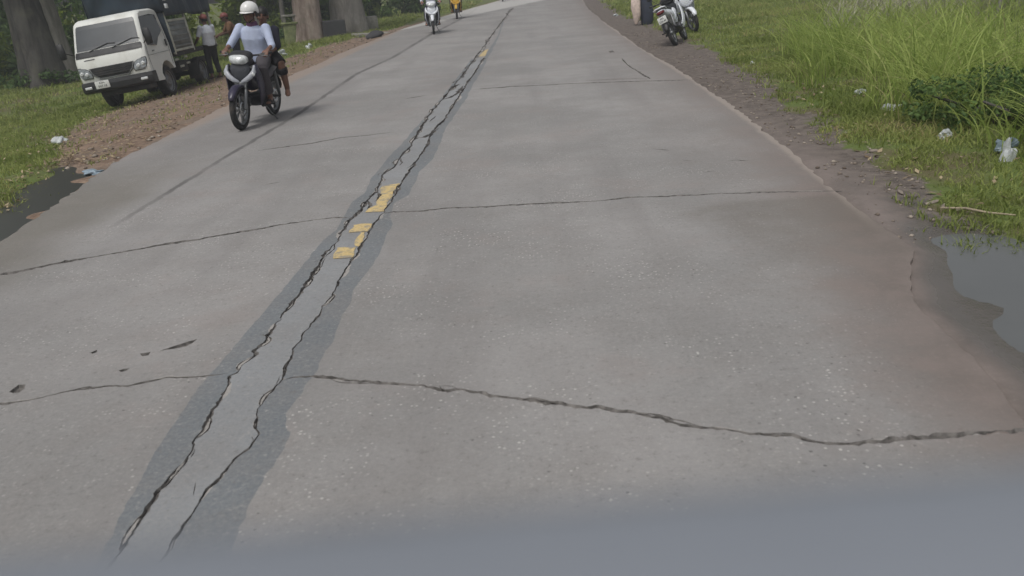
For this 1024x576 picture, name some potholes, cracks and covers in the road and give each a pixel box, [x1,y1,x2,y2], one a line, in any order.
crack [120,8,513,545]
crack [482,78,675,89]
crack [282,375,1024,446]
crack [0,217,347,275]
crack [388,191,842,213]
crack [0,374,220,405]
